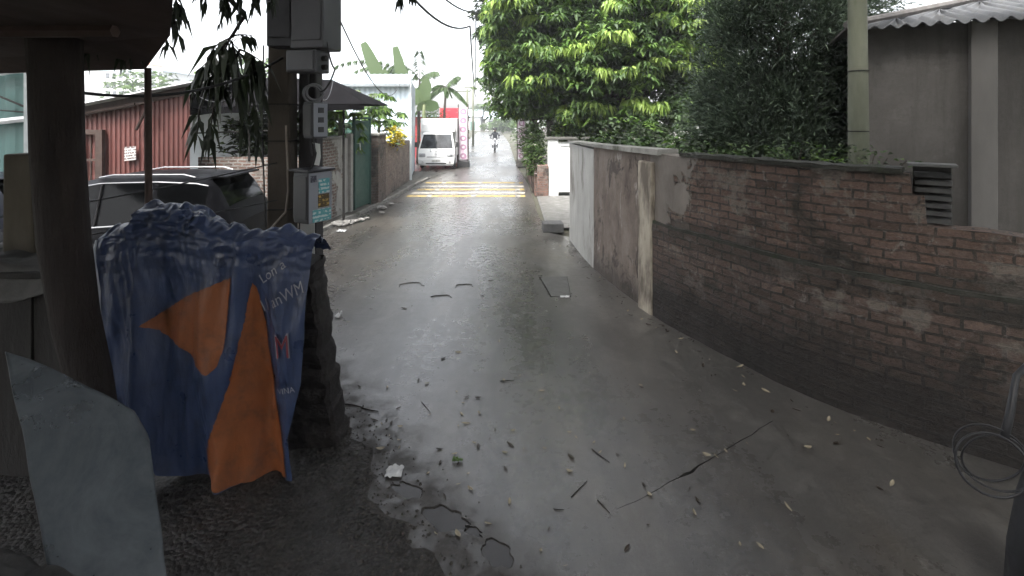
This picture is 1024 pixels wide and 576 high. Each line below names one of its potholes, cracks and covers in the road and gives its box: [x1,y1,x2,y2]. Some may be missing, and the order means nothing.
pothole [390,481,423,499]
pothole [481,537,514,569]
pothole [421,504,471,532]
crack [618,421,772,509]
manhole cover [539,276,571,297]
